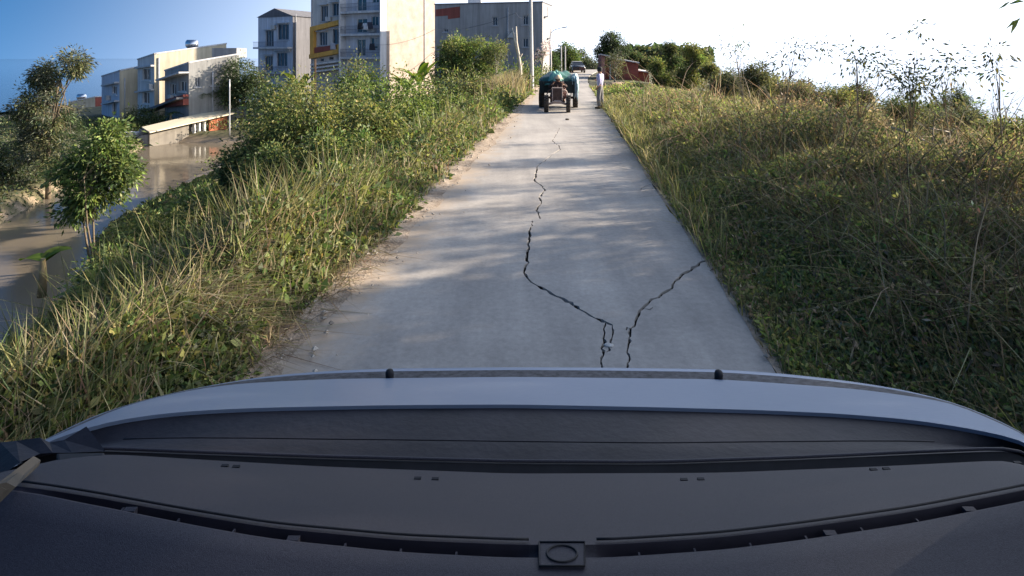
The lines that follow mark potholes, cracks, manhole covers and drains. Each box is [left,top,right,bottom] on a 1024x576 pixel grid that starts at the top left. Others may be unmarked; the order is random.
crack [523,130,700,368]
